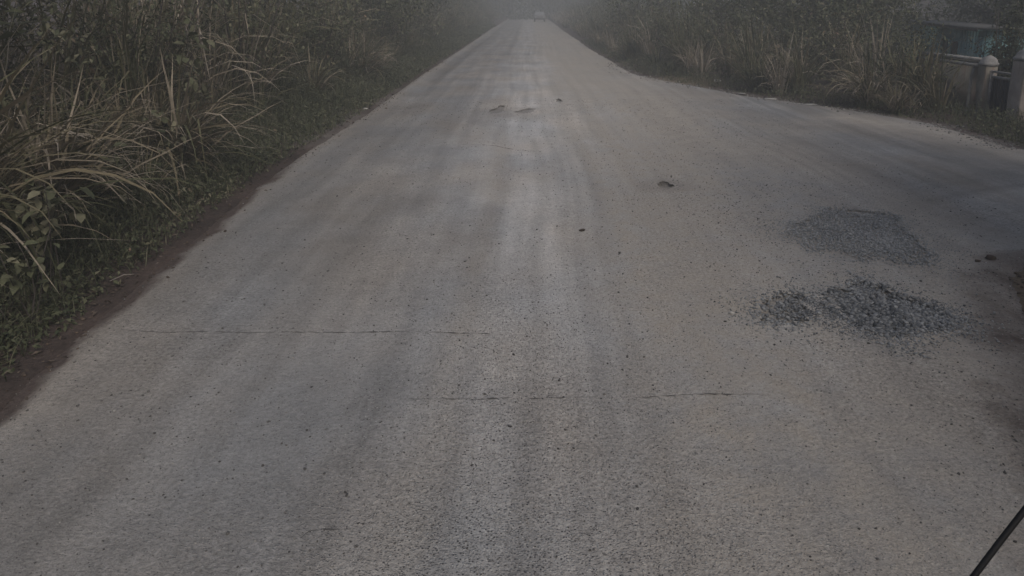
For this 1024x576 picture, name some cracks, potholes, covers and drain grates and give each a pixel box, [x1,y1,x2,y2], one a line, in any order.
pothole [484,104,511,114]
